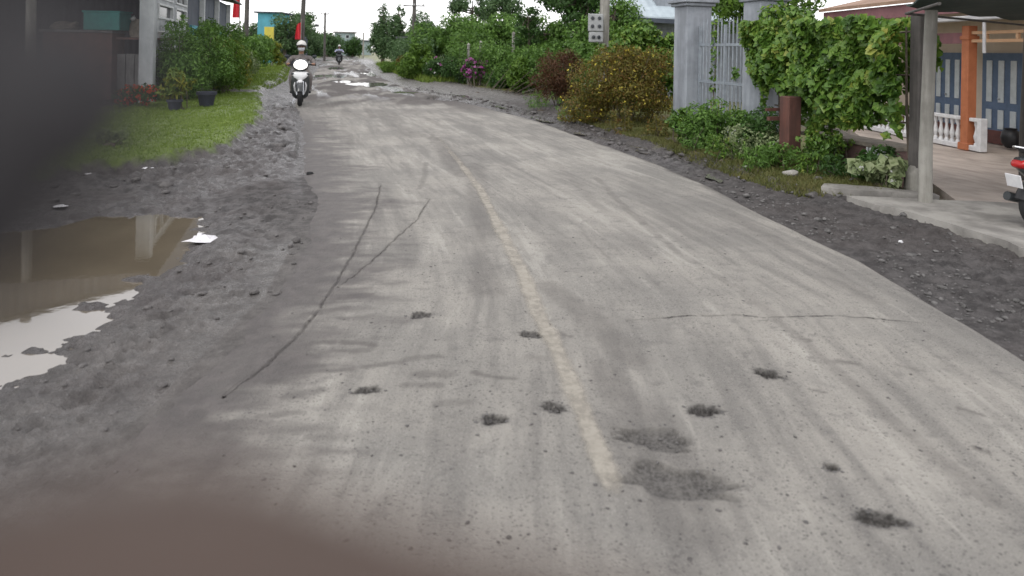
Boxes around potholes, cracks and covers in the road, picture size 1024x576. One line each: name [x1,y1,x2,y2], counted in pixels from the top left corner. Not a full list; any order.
pothole [404,310,436,321]
pothole [474,412,513,428]
pothole [514,330,544,341]
crack [223,183,431,398]
pothole [848,507,918,533]
pothole [682,402,731,420]
pothole [817,460,847,475]
crack [626,313,925,325]
pothole [347,384,387,397]
pothole [535,399,572,416]
pothole [748,367,791,382]
